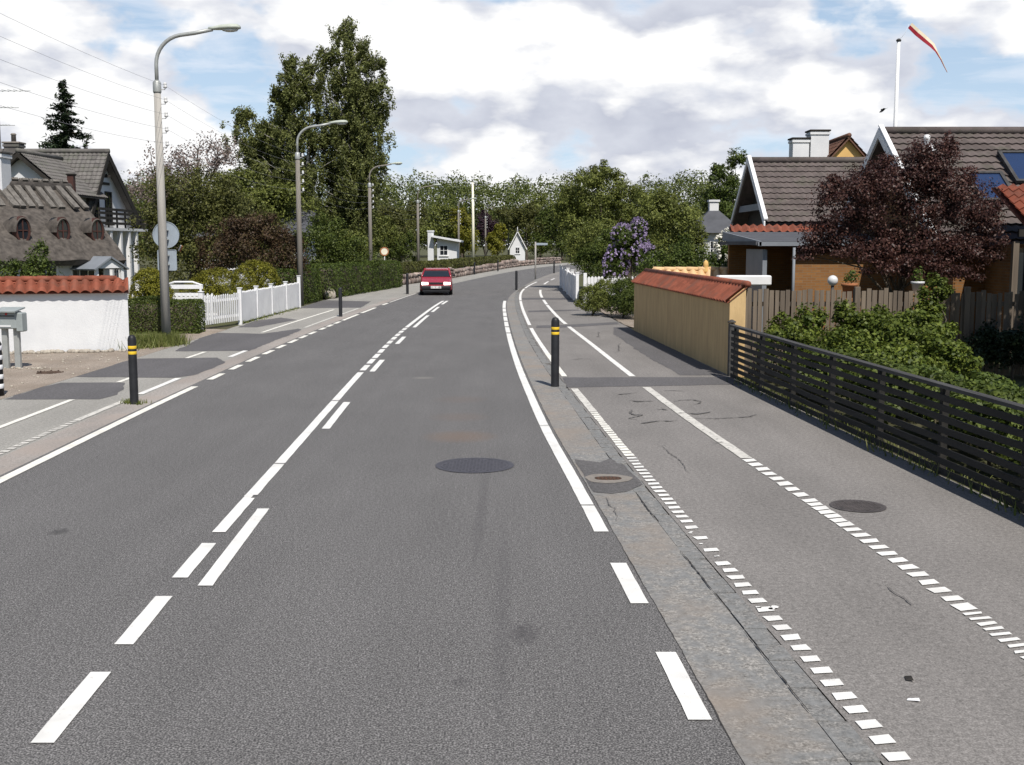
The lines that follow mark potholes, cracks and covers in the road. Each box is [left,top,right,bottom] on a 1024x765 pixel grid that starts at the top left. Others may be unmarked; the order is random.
crack [665,390,756,419]
manhole cover [829,500,887,512]
crack [624,392,674,423]
manhole cover [435,458,514,473]
